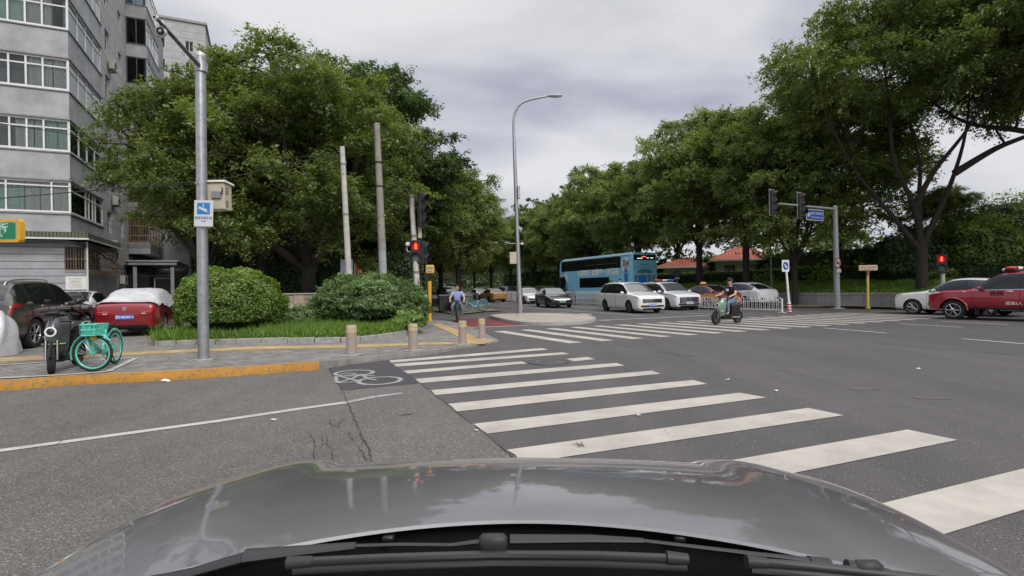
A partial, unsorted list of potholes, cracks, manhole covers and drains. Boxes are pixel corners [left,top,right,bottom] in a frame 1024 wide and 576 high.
crack [306,418,354,460]
